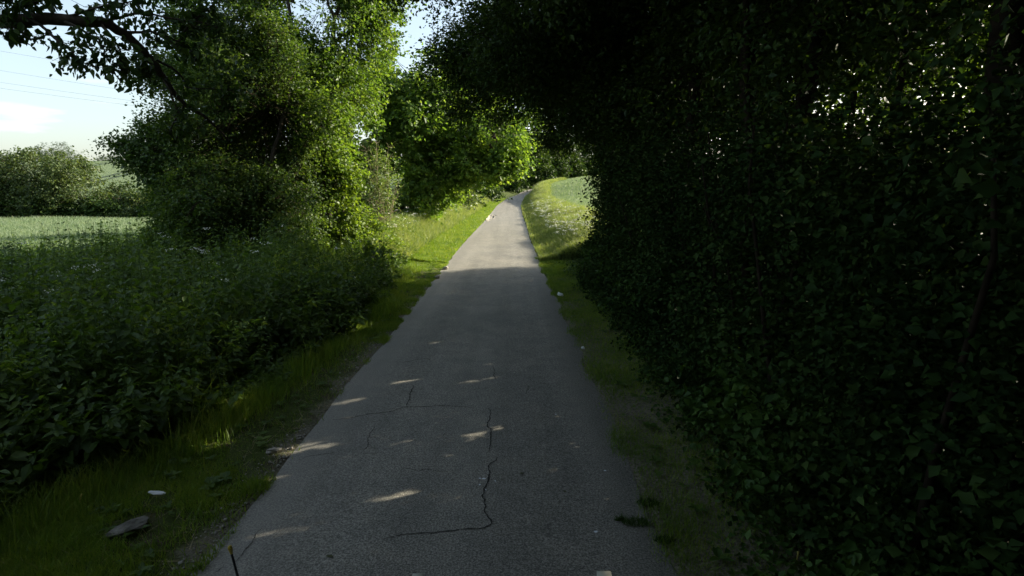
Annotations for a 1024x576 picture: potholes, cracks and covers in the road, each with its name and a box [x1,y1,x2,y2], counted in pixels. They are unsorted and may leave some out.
crack [384,408,498,539]
crack [333,386,461,449]
